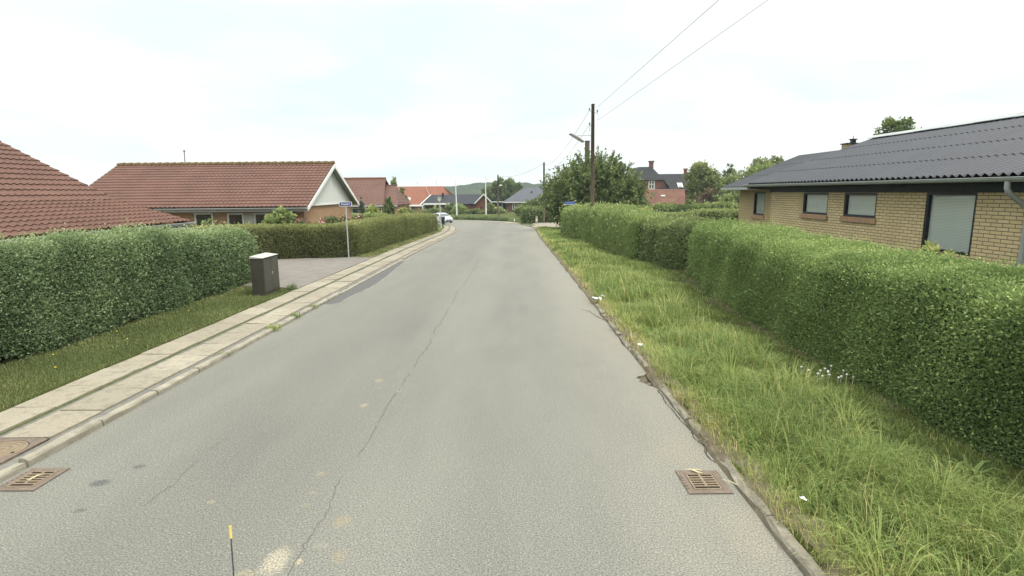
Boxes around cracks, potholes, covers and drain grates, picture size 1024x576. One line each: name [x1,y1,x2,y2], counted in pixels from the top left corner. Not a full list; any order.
drain grate [0,468,70,491]
drain grate [675,470,734,494]
manhole cover [0,438,49,465]
crack [657,389,715,462]
